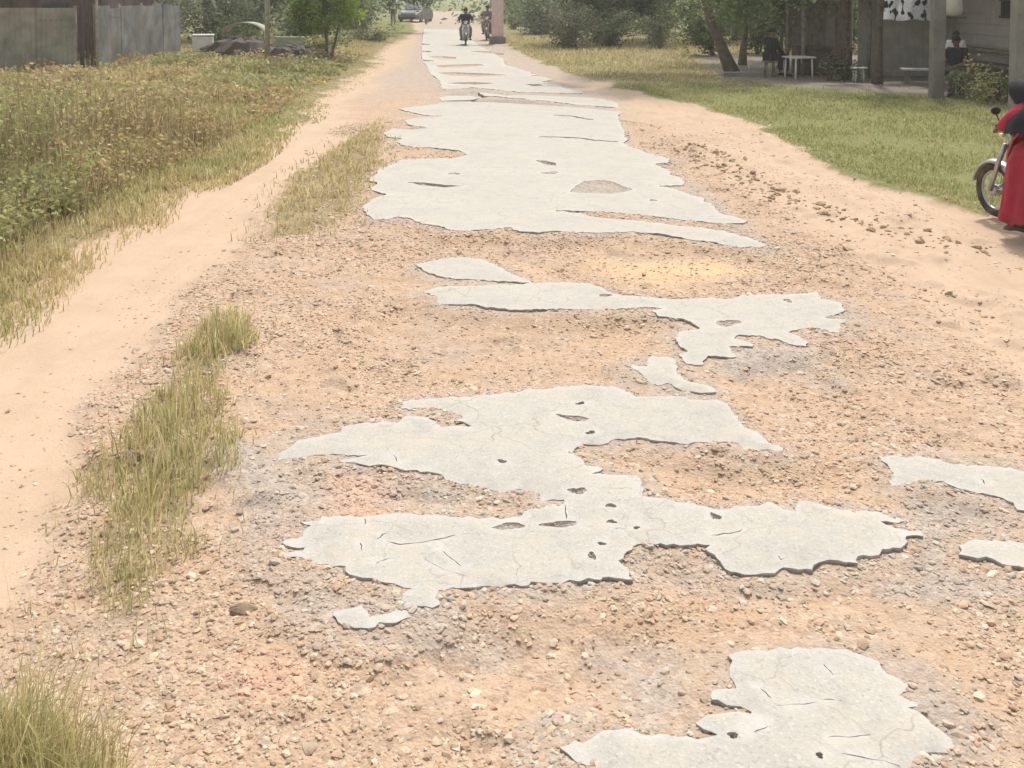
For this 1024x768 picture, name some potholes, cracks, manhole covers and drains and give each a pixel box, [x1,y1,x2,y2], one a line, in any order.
pothole [292,580,896,739]
pothole [571,180,632,194]
